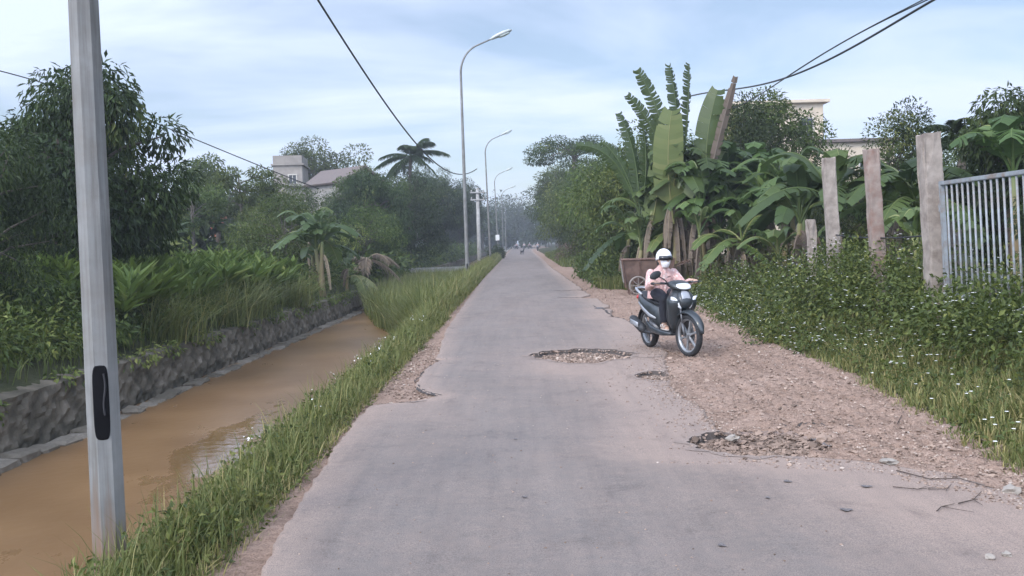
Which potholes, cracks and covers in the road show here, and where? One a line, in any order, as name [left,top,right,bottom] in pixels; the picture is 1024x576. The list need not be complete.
pothole [522,347,641,364]
pothole [627,370,674,383]
pothole [672,429,832,460]
